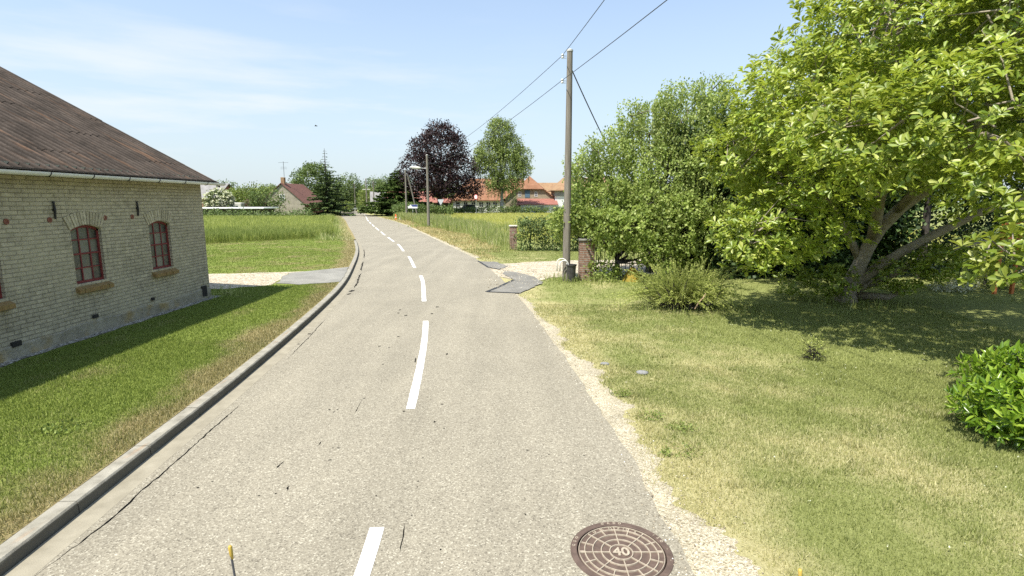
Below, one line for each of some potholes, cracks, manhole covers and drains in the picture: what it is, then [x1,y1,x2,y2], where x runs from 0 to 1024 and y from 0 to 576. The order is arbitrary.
manhole cover [570,522,674,576]
crack [39,406,238,573]
